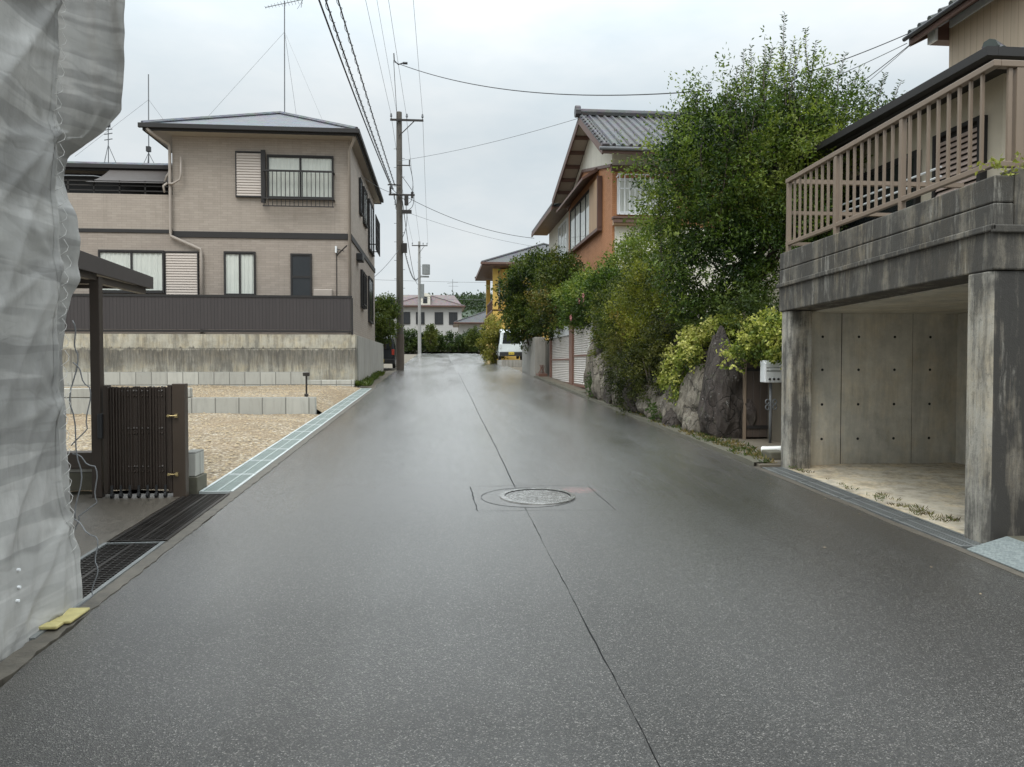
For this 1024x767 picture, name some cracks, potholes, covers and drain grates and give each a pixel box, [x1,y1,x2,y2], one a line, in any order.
drain grate [109,493,230,543]
manhole cover [481,488,576,507]
